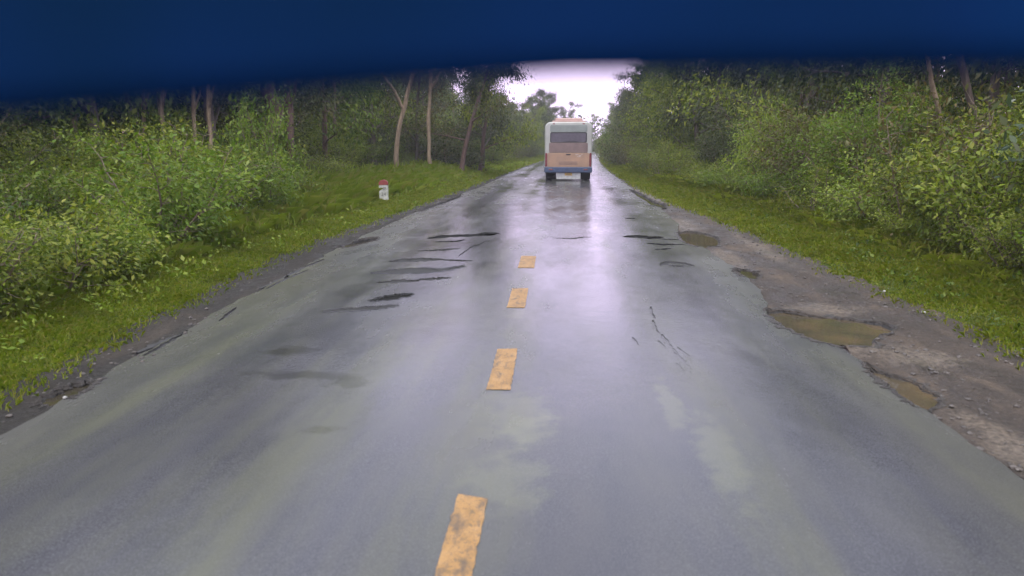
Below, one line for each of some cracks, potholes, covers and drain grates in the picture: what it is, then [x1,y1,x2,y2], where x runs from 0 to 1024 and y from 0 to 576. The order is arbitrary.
pothole [367,293,415,302]
crack [632,307,692,375]
crack [136,307,236,356]
pothole [763,307,898,348]
pothole [861,362,948,412]
pothole [675,231,723,249]
pothole [729,266,763,281]
